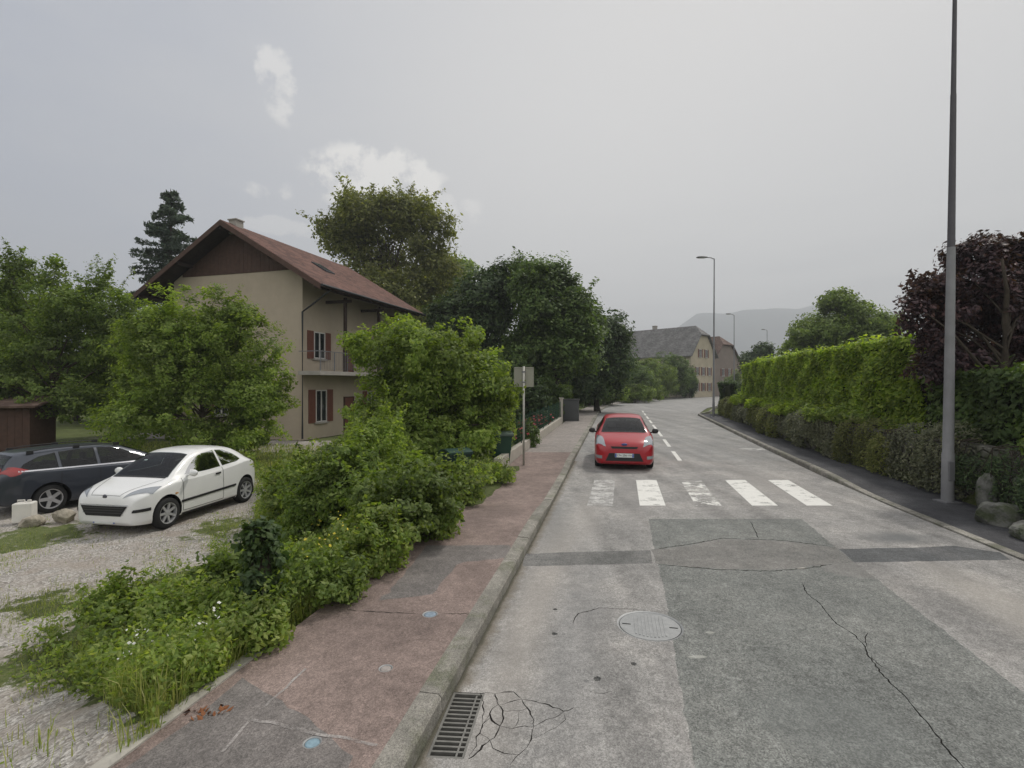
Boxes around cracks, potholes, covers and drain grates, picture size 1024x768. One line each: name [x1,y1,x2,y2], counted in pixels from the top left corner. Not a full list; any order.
drain grate [426,692,485,759]
manhole cover [617,611,684,642]
crack [469,691,575,762]
crack [803,585,964,768]
